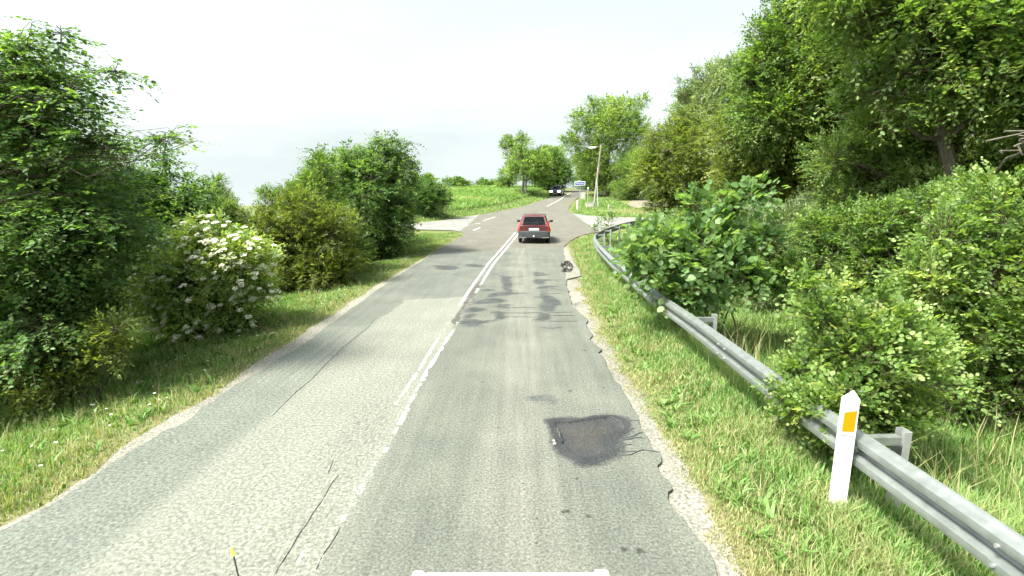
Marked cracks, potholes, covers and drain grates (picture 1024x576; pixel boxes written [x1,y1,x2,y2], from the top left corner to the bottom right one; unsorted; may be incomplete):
crack [275,461,336,574]
pothole [538,412,637,473]
